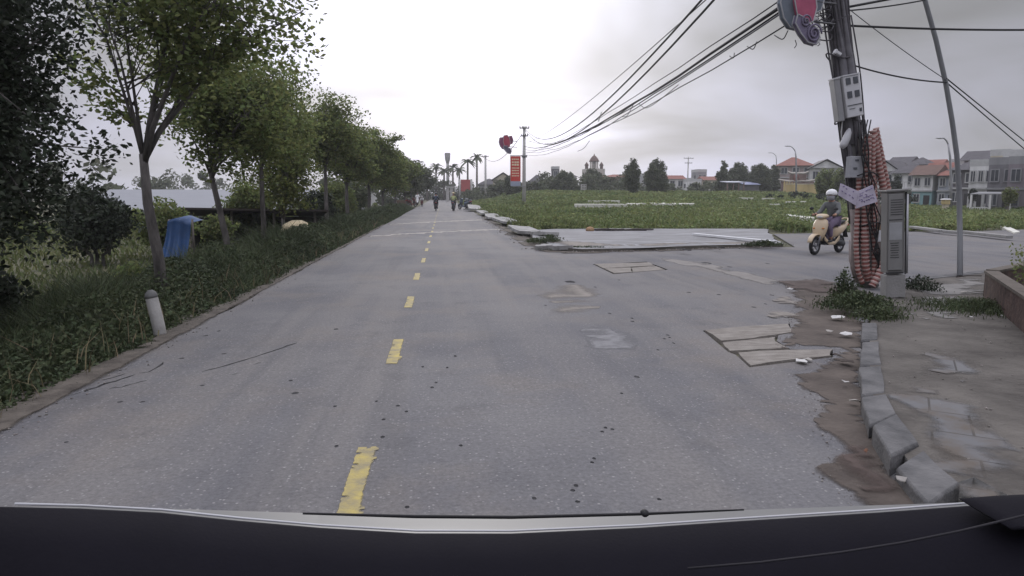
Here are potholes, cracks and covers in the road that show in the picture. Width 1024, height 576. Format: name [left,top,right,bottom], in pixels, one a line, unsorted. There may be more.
crack [73,362,164,395]
manhole cover [593,262,668,274]
crack [202,343,296,375]
